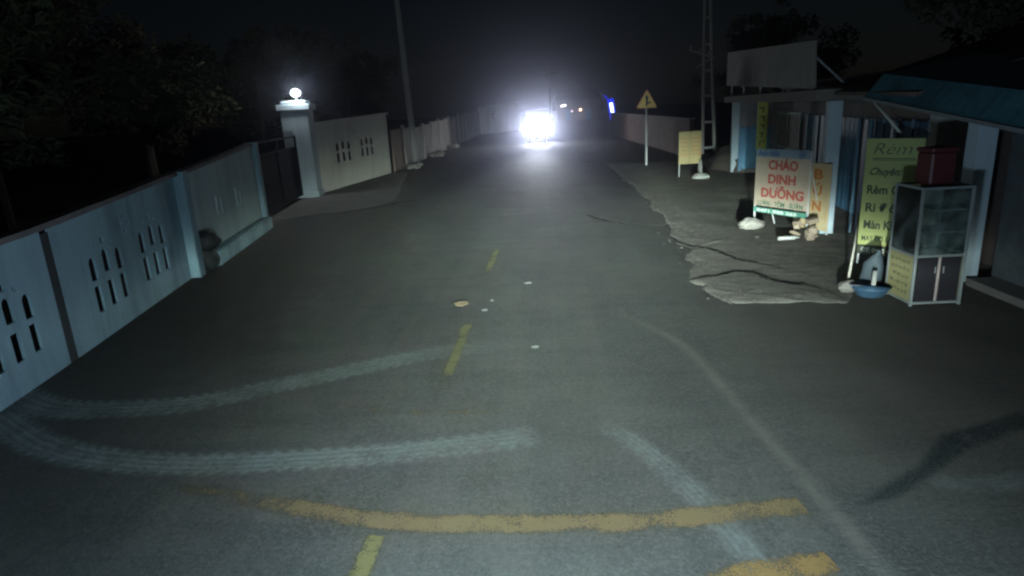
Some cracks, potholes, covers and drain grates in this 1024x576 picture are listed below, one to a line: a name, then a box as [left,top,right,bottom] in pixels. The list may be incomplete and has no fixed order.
crack [586,214,806,285]
